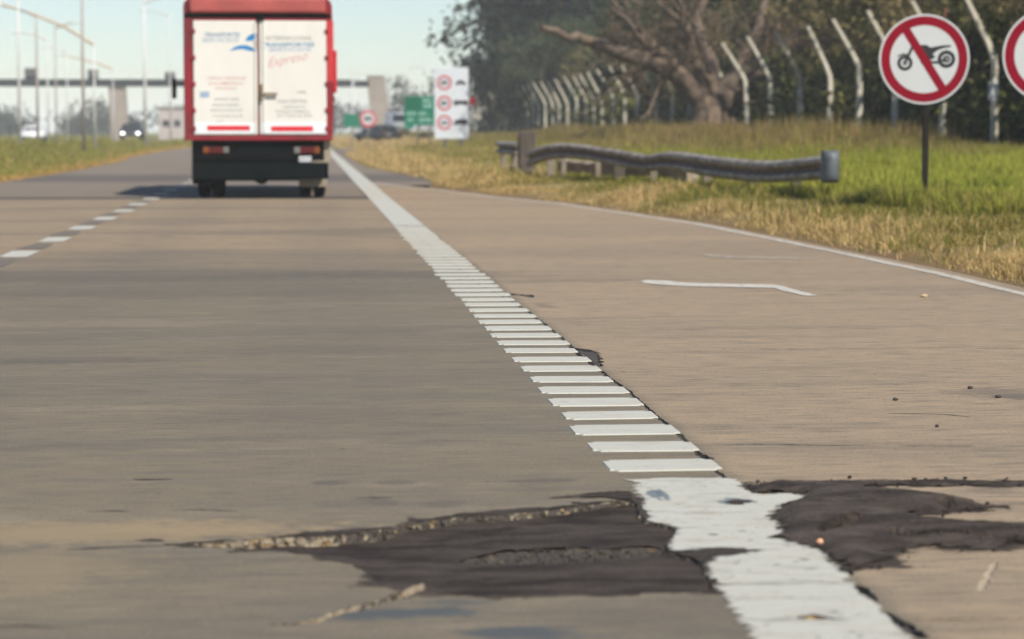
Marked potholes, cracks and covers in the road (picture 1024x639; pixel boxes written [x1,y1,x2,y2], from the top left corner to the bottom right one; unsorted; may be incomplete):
crack [275,593,415,625]
pothole [163,490,763,599]
